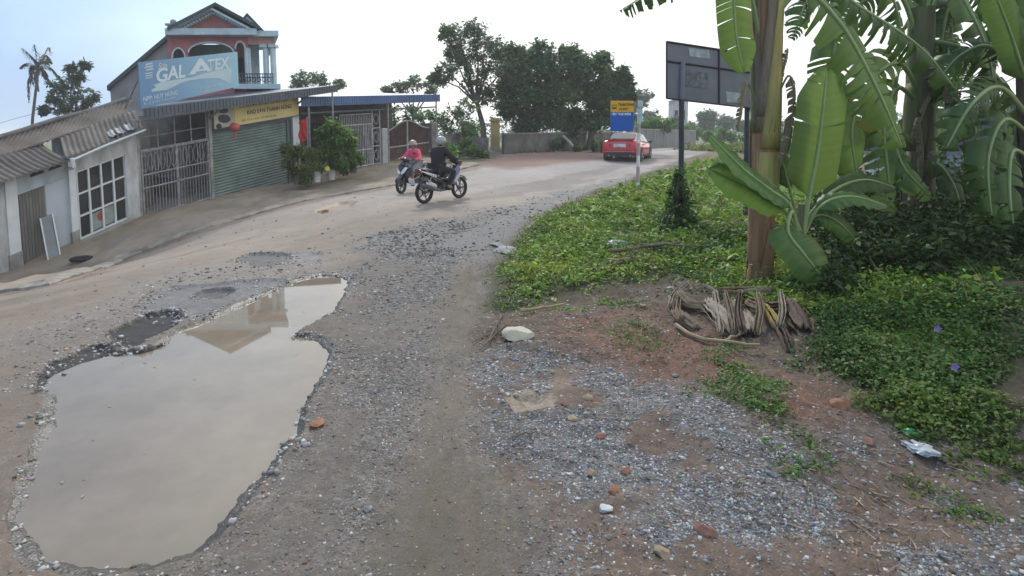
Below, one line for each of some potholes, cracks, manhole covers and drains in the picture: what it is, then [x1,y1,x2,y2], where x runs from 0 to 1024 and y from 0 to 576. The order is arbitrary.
pothole [238,251,291,267]
pothole [289,251,325,265]
pothole [0,272,356,576]
